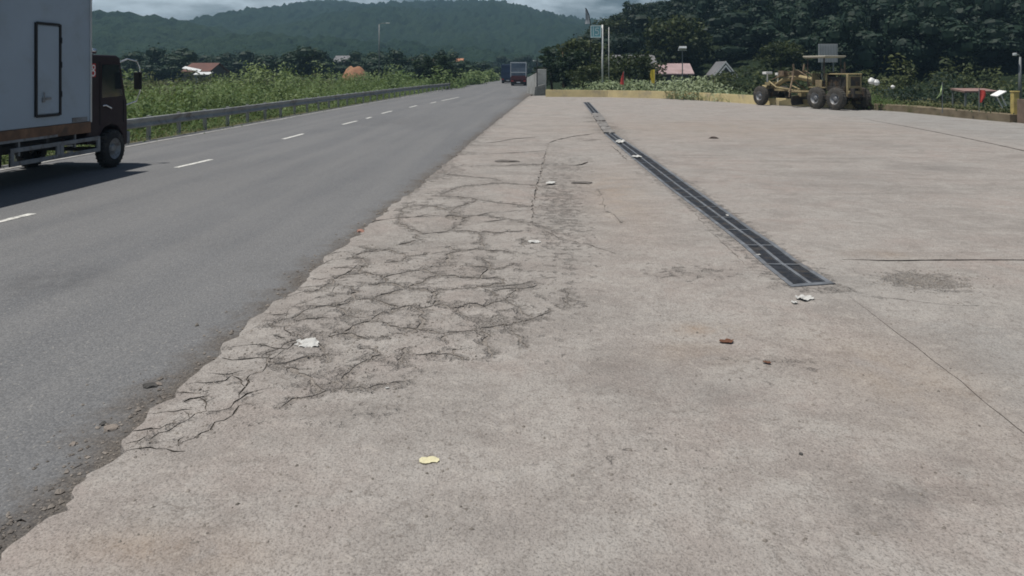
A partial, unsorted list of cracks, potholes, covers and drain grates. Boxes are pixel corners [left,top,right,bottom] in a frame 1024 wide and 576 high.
crack [126,134,627,452]
